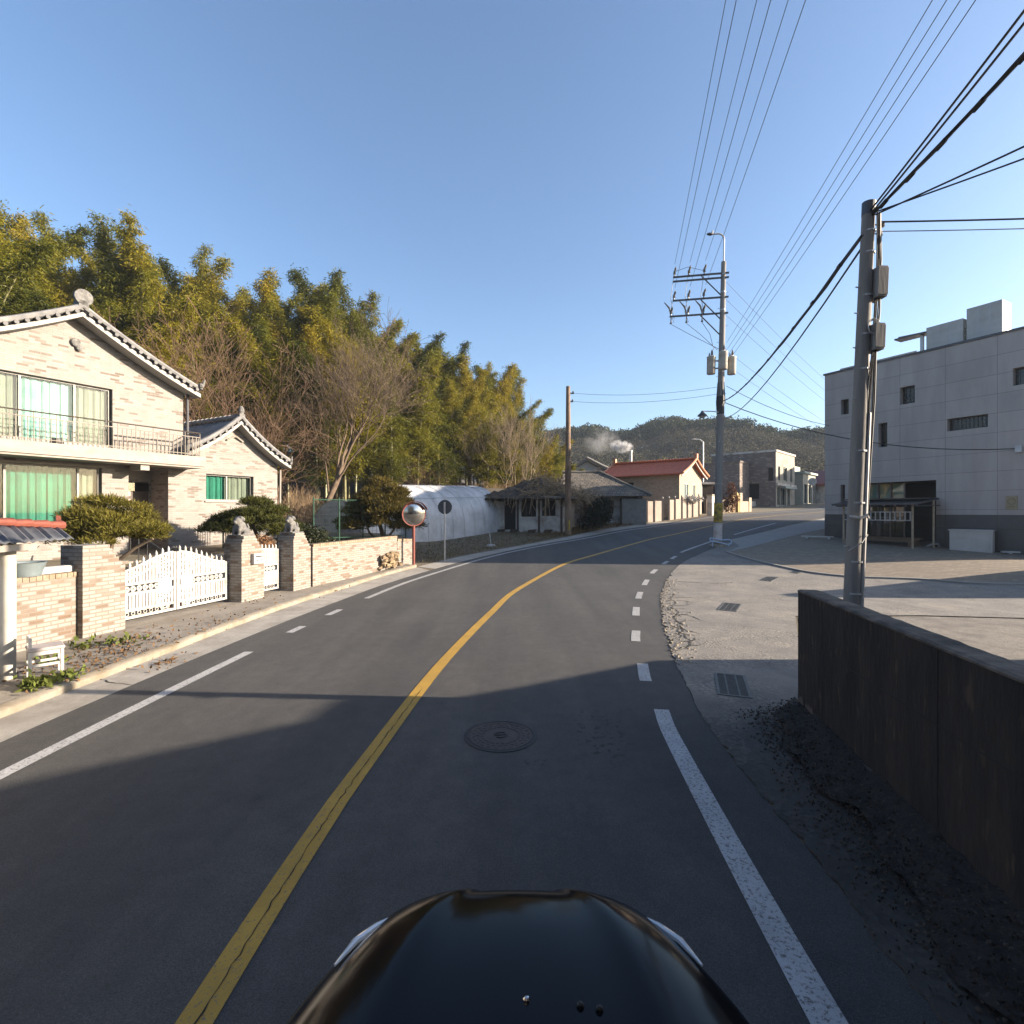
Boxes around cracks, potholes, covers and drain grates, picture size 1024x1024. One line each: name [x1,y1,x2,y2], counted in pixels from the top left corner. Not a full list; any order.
drain grate [717,602,742,612]
drain grate [714,672,753,698]
crack [667,581,732,650]
manhole cover [464,720,537,753]
